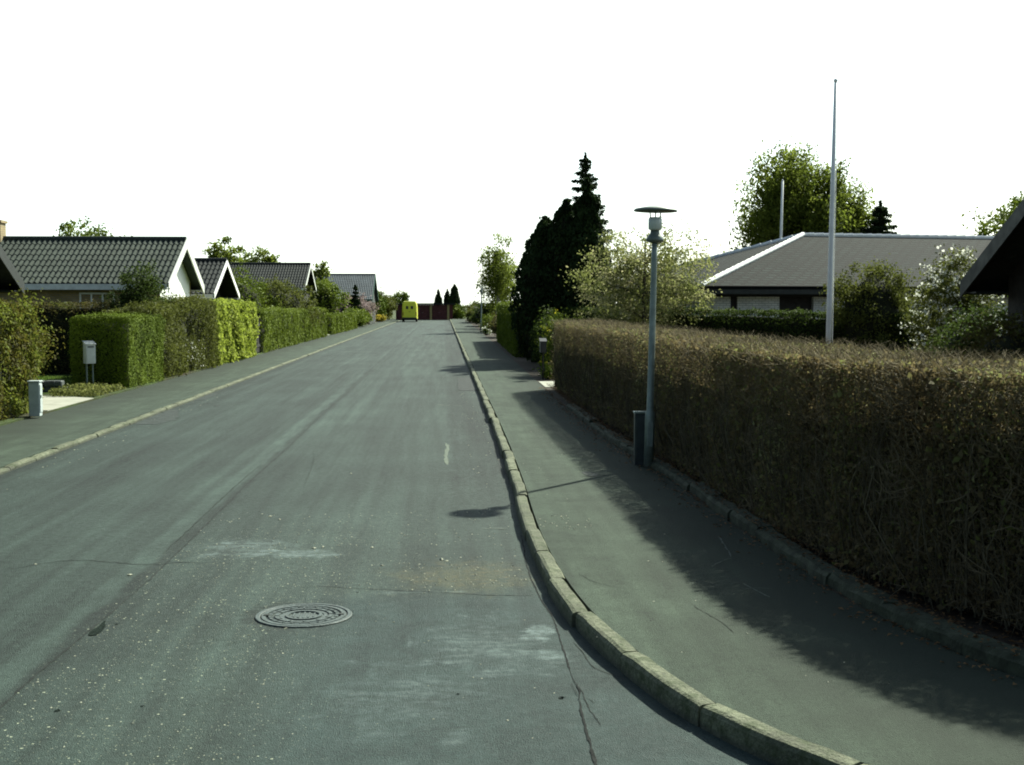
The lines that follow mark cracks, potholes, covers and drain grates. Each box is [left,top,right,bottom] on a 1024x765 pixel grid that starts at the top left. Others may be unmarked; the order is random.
manhole cover [255,603,352,628]
crack [483,528,617,765]
